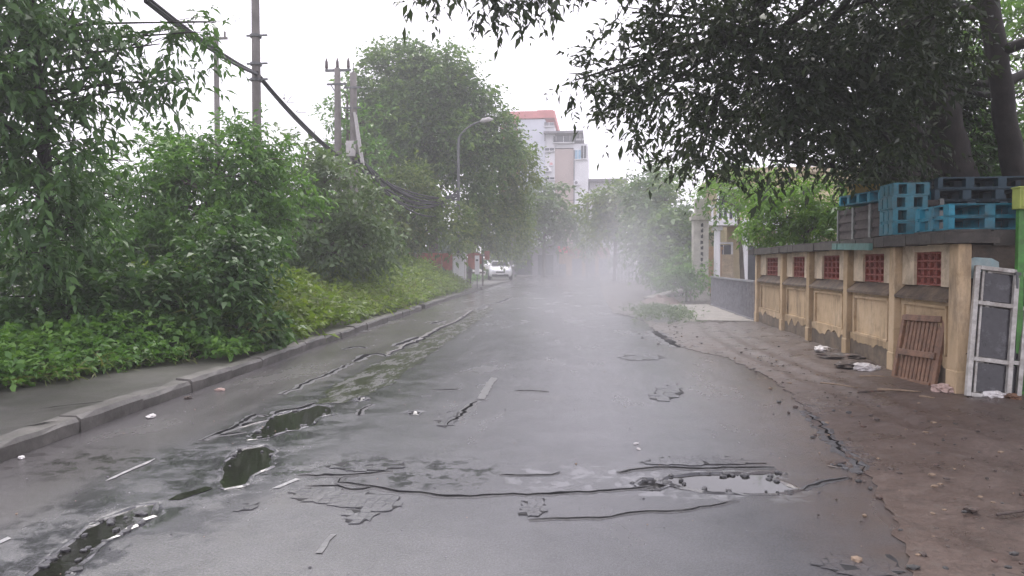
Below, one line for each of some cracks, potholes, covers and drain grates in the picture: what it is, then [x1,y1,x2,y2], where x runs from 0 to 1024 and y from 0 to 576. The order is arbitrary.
pothole [655,470,805,496]
pothole [18,502,159,576]
crack [199,310,473,441]
pothole [214,445,279,490]
pothole [630,477,670,490]
pothole [246,404,335,440]
crack [287,454,777,524]
crack [799,397,876,491]
